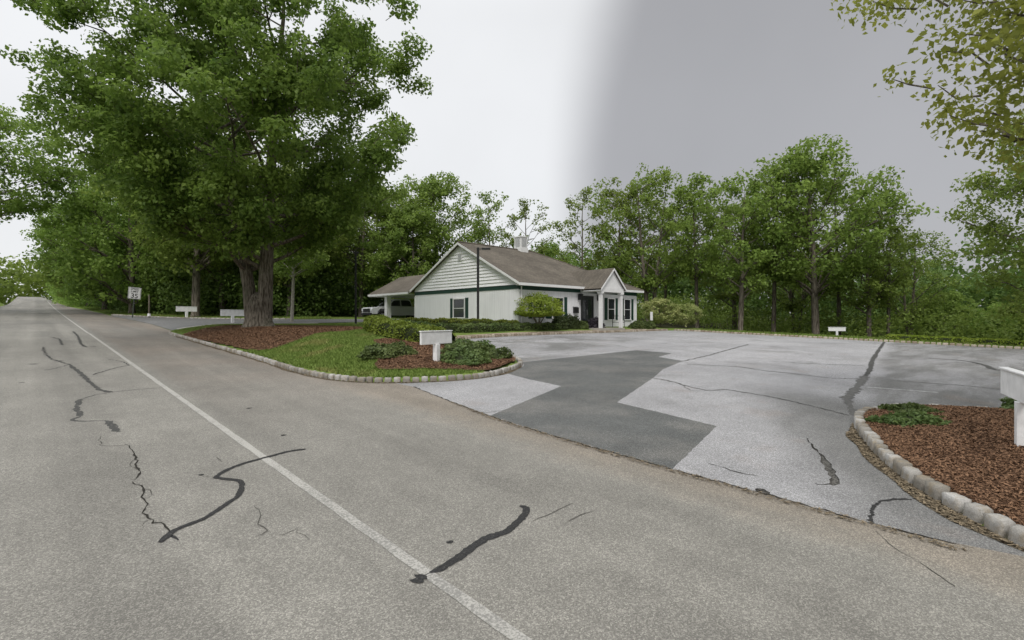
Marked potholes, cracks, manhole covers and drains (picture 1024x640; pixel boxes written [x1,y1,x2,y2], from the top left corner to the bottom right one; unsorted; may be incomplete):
crack [650,377,847,415]
crack [685,344,857,379]
crack [886,358,1024,389]
